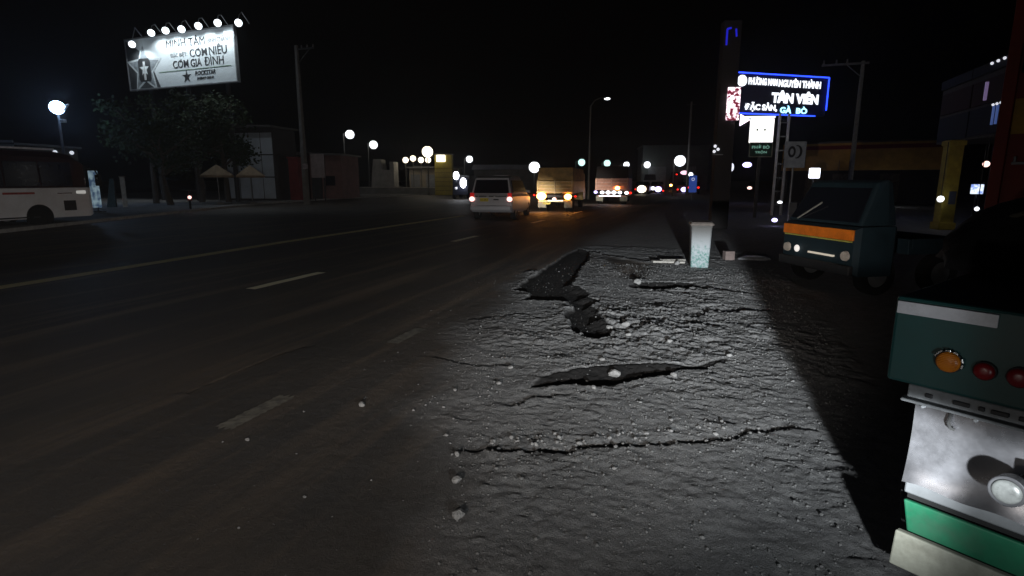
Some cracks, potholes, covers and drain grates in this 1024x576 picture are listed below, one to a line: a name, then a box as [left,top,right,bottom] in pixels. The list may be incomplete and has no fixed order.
crack [499,420,807,459]
pothole [532,356,730,387]
pothole [514,249,618,339]
